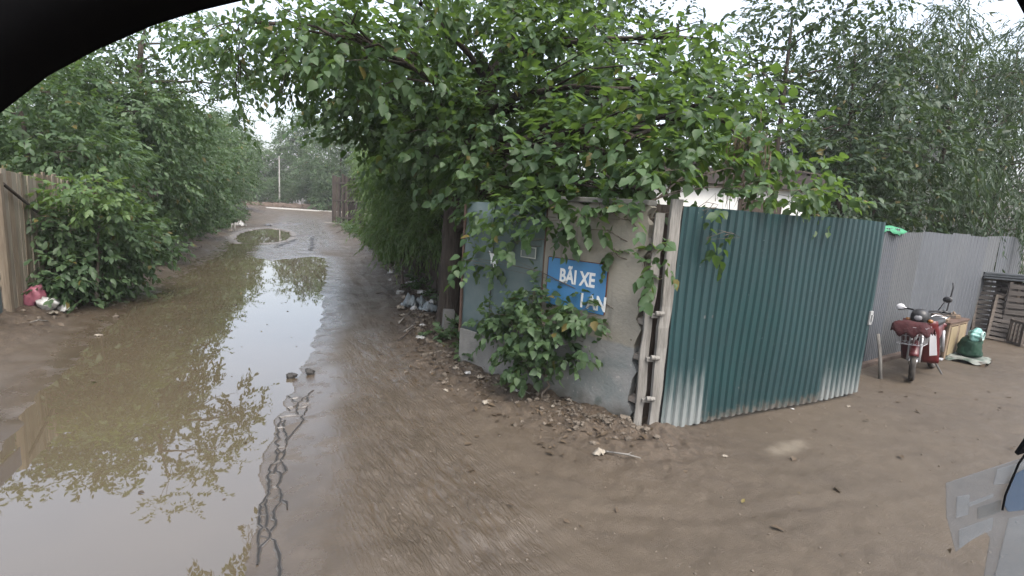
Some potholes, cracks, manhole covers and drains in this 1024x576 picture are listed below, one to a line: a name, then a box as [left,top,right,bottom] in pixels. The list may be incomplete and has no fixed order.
crack [256,390,314,576]
